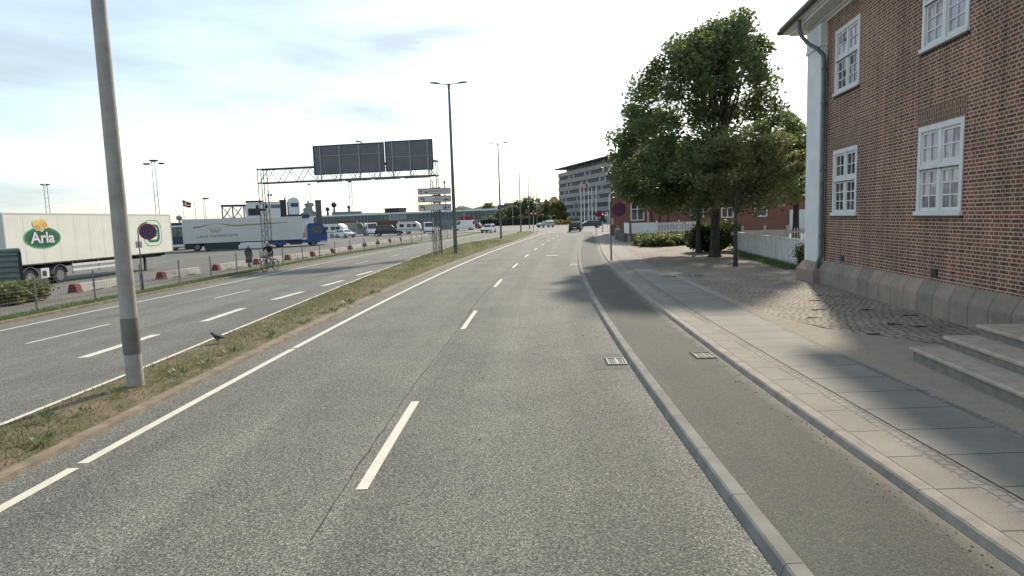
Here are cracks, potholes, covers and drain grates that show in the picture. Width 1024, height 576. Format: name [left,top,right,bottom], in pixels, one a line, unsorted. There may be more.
drain grate [604,357,628,365]
